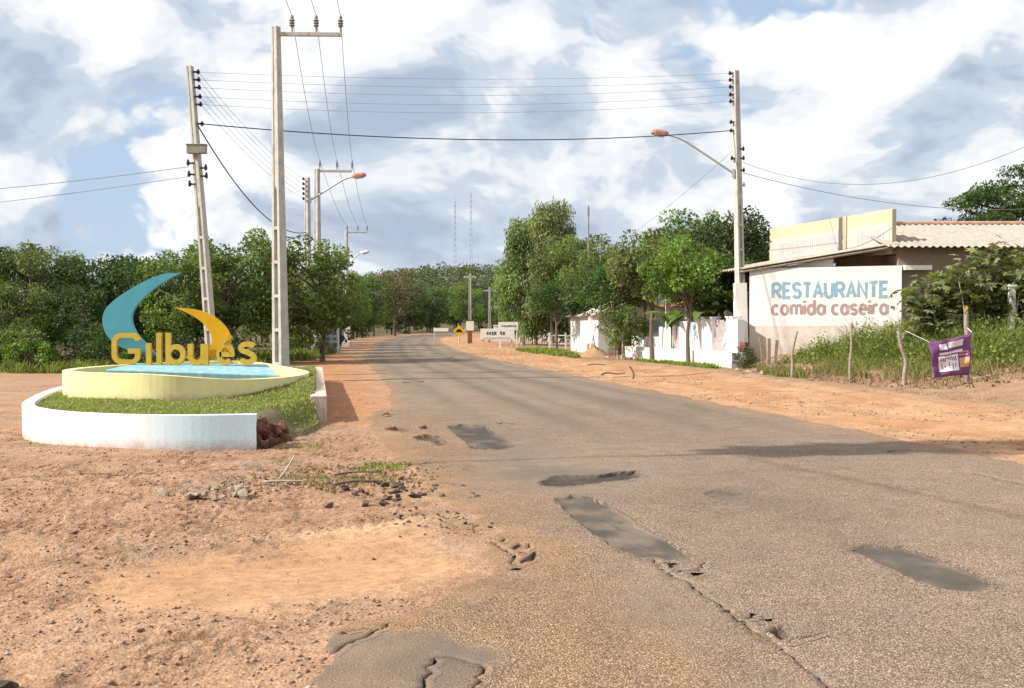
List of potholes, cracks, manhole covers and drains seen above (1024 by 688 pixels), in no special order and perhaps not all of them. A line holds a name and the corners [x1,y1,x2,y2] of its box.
pothole [446,424,517,451]
pothole [499,542,527,557]
pothole [552,494,695,563]
pothole [845,543,1005,594]
pothole [411,434,450,446]
pothole [534,470,649,487]
pothole [513,549,542,568]
crack [646,558,841,688]
